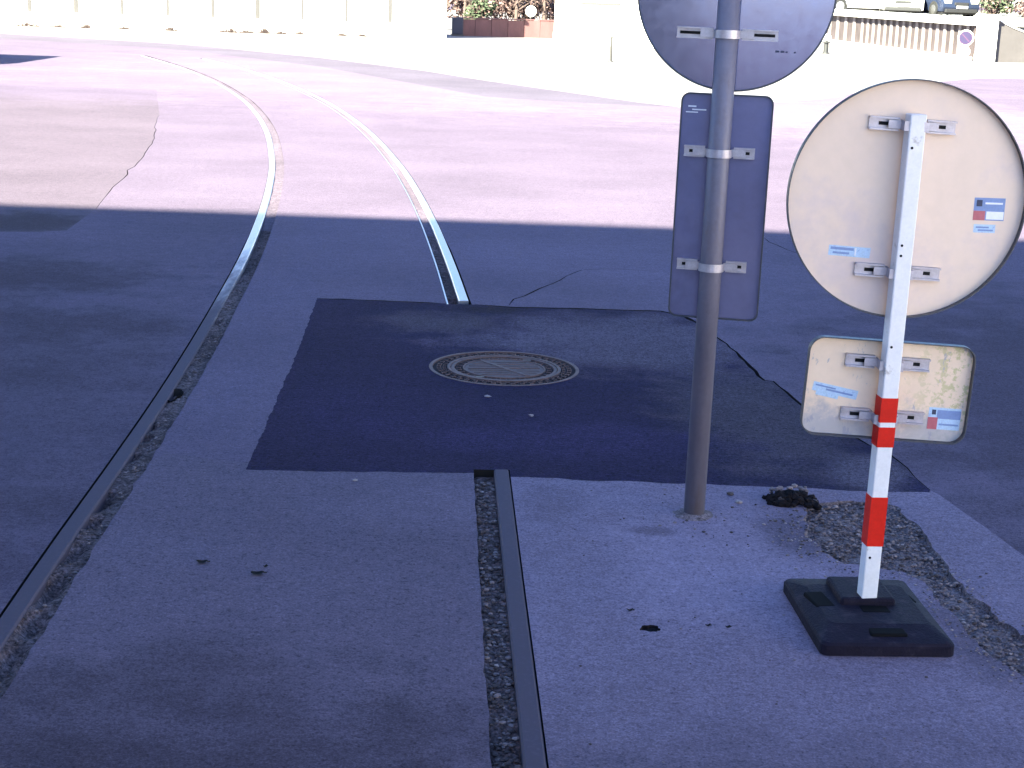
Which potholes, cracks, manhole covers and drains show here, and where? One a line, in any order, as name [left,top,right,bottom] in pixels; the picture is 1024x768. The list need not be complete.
pothole [803,501,1024,676]
crack [509,269,646,305]
manhole cover [429,351,579,386]
